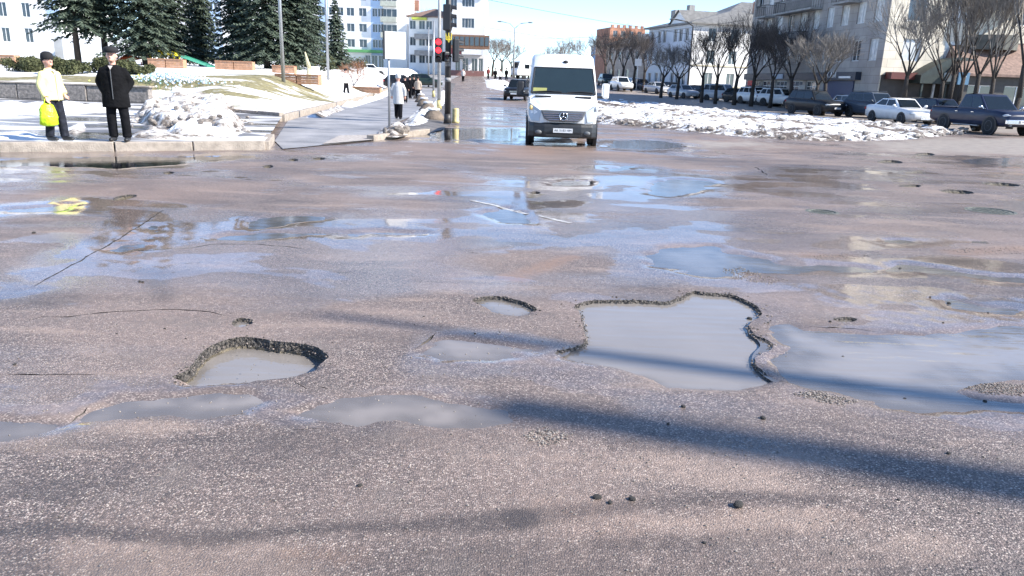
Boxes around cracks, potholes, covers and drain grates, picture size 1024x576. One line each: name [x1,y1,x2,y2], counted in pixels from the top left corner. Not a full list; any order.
pothole [232,318,254,327]
pothole [555,290,787,390]
pothole [169,331,340,386]
crack [20,309,225,323]
pothole [473,296,537,316]
